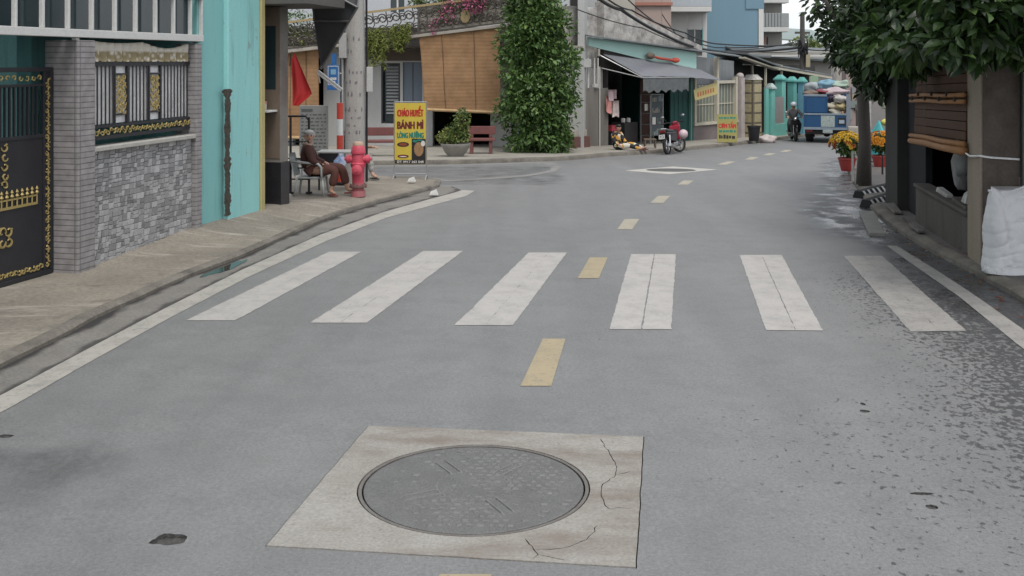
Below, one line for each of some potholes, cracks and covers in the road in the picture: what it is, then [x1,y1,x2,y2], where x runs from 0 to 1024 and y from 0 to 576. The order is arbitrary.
crack [525,440,630,560]
manhole cover [625,166,717,174]
manhole cover [266,426,643,569]
pothole [149,533,187,545]
